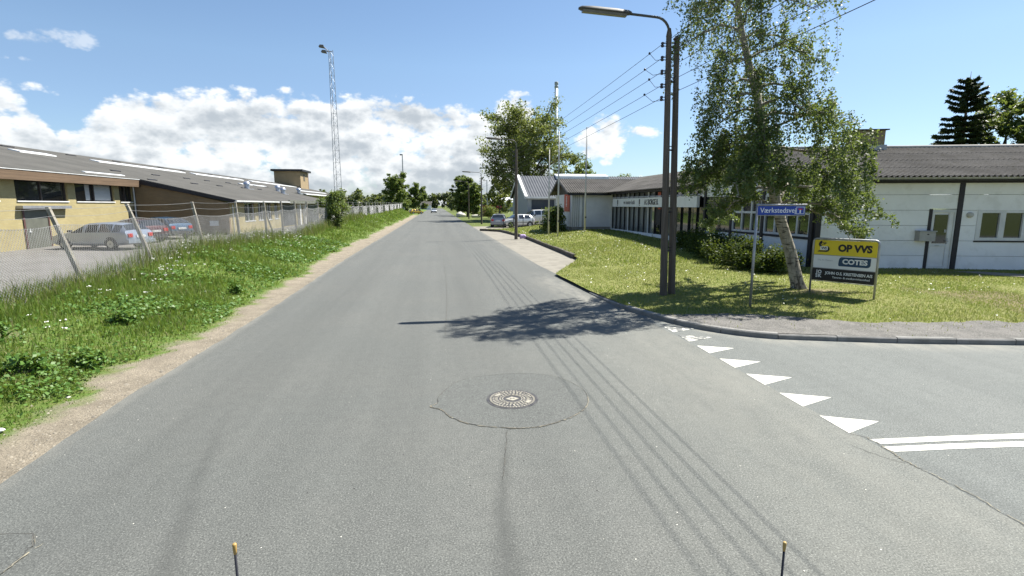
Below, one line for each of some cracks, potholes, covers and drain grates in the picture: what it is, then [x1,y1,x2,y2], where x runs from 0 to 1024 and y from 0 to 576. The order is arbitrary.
manhole cover [487,390,538,409]
